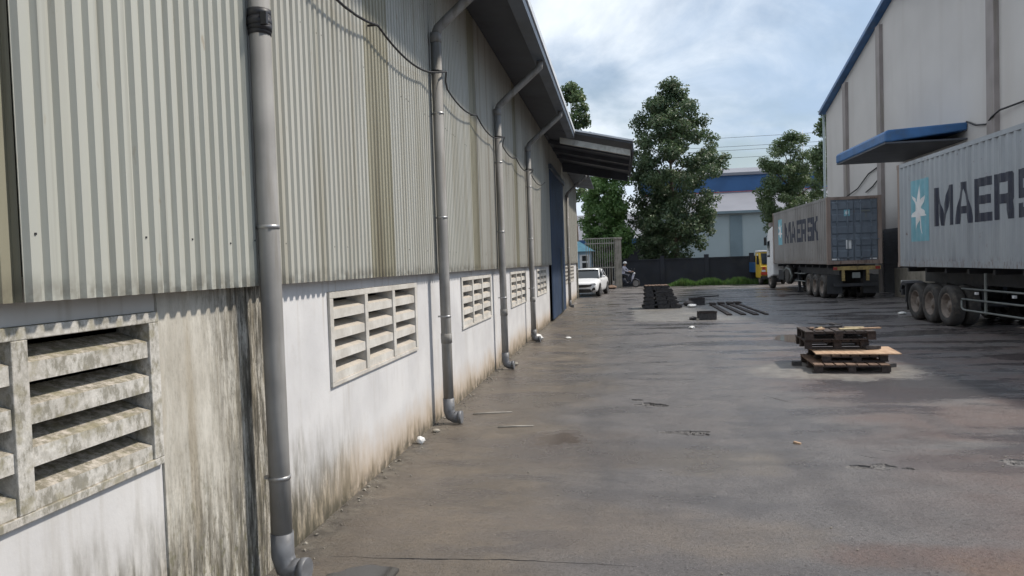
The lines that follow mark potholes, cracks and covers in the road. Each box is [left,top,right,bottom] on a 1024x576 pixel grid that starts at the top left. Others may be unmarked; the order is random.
pothole [998,459,1024,467]
pothole [846,463,897,471]
